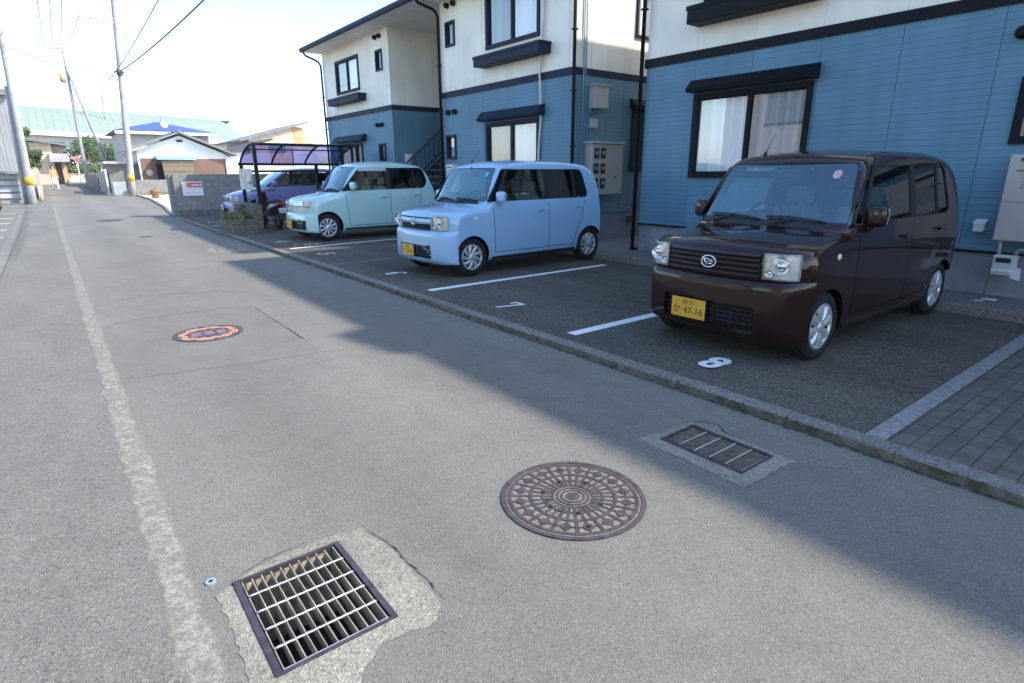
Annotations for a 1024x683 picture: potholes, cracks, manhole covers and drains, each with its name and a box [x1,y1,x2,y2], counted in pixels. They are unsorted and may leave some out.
drain grate [639,422,796,488]
manhole cover [501,461,647,541]
manhole cover [173,325,243,342]
drain grate [215,528,441,683]
